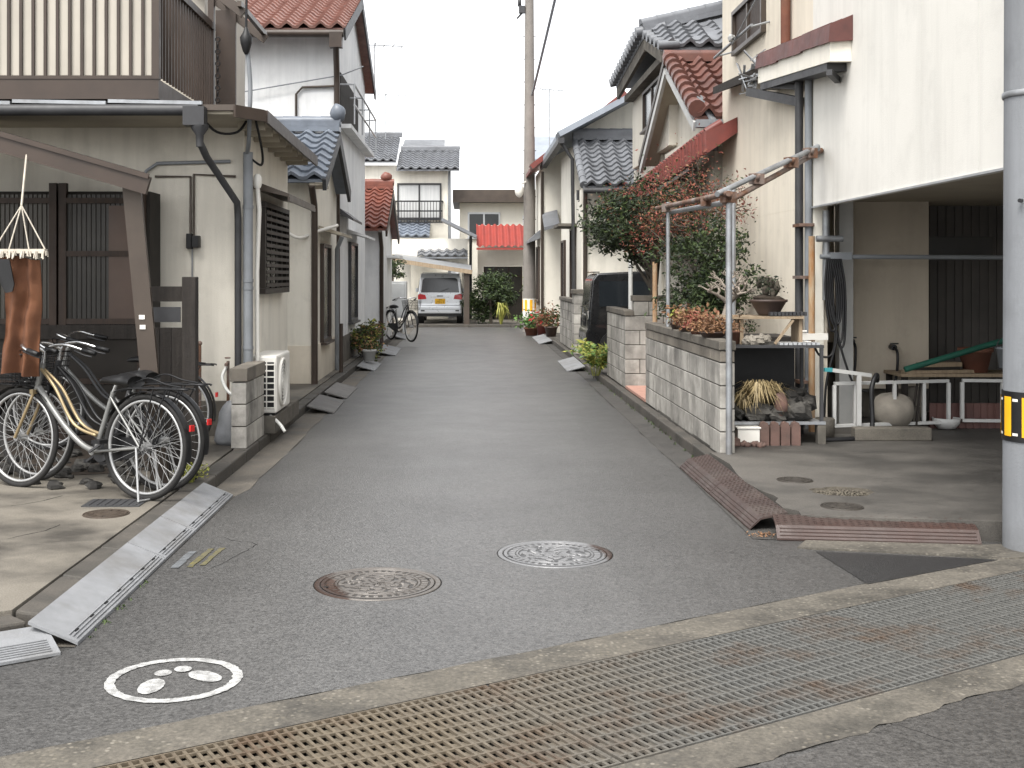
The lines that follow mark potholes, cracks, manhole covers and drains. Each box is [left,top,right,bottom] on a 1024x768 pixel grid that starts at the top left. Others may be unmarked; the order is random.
manhole cover [497,540,613,568]
manhole cover [313,567,442,601]
